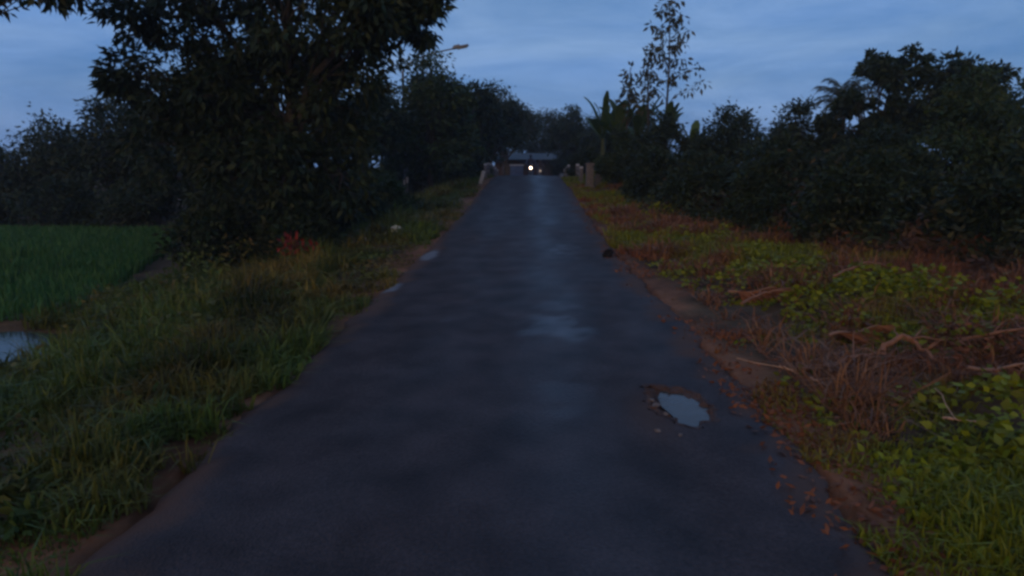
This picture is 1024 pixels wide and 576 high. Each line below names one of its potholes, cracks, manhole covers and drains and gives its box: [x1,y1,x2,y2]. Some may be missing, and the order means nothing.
pothole [641,383,720,430]
